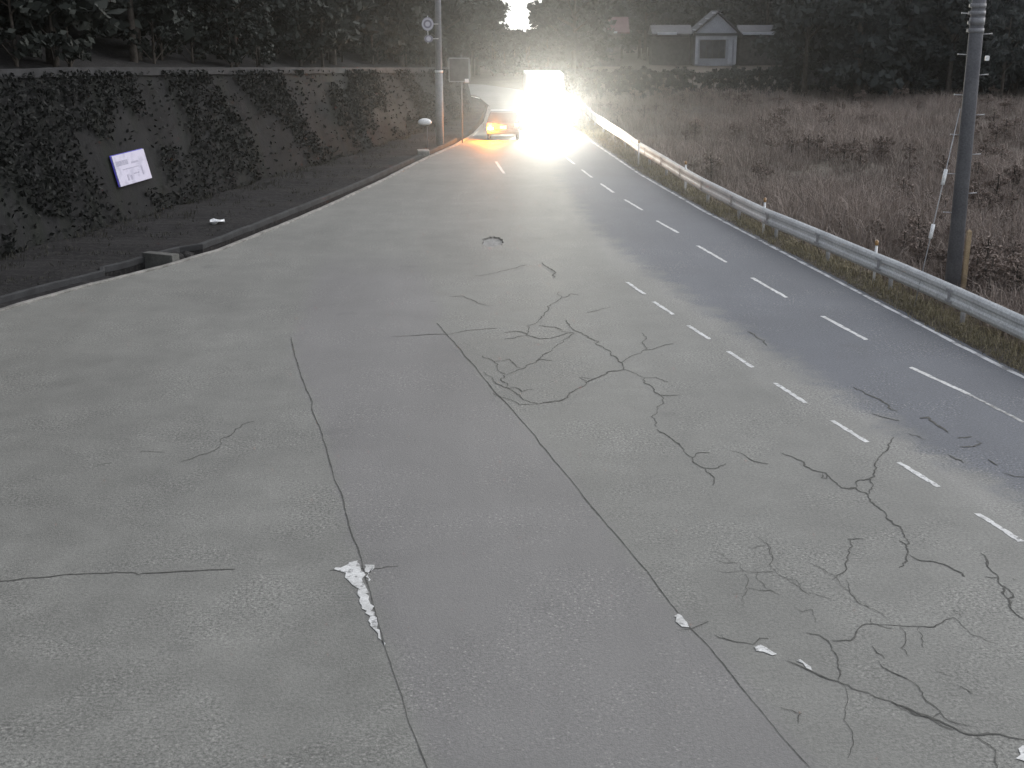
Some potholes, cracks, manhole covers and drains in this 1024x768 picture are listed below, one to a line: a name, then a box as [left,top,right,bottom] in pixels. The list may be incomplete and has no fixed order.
crack [2,569,226,581]
pothole [482,236,504,247]
crack [657,387,1024,768]
crack [484,292,674,427]
